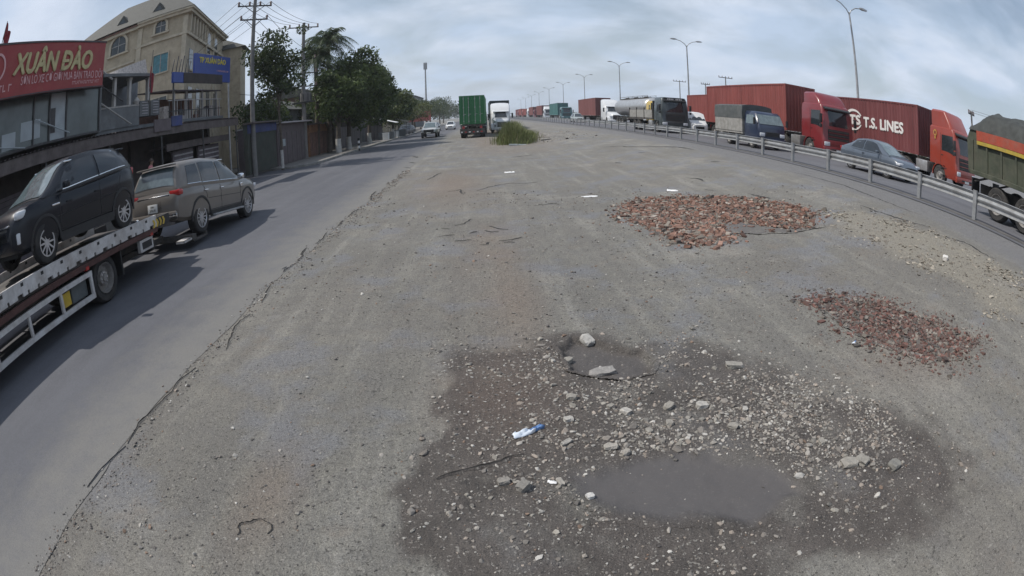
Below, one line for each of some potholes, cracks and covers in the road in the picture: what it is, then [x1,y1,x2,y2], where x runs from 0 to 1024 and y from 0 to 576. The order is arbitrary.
pothole [560,444,818,532]
pothole [550,334,662,381]
crack [237,518,273,535]
crack [87,367,196,487]
